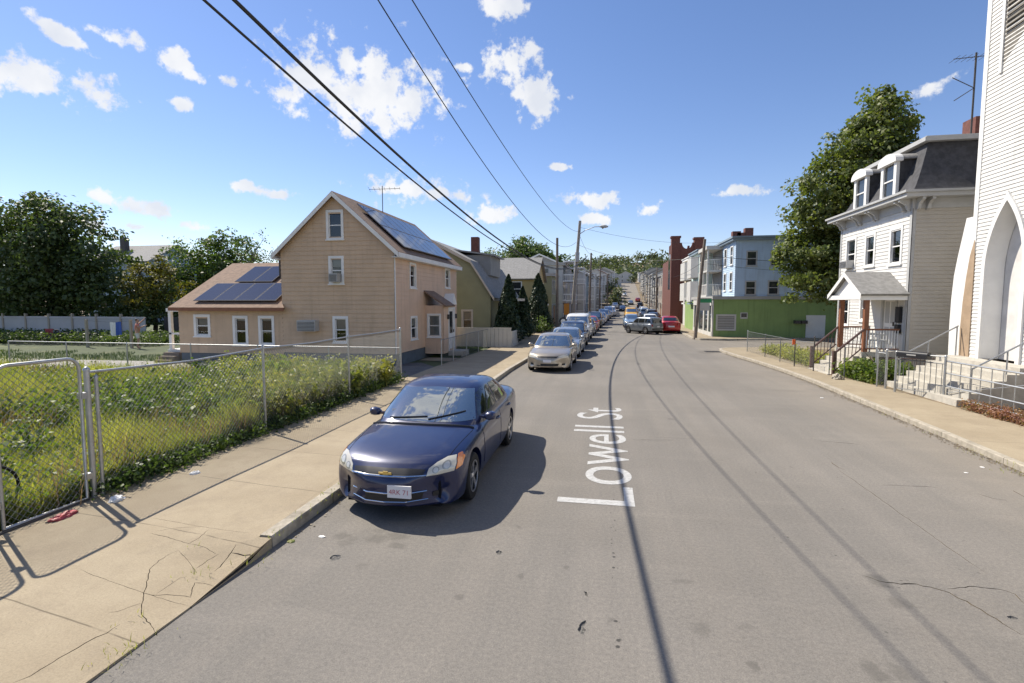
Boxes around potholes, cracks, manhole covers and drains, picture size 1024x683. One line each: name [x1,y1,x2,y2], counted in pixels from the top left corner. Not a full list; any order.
crack [832,463,986,573]
crack [866,576,1020,634]
